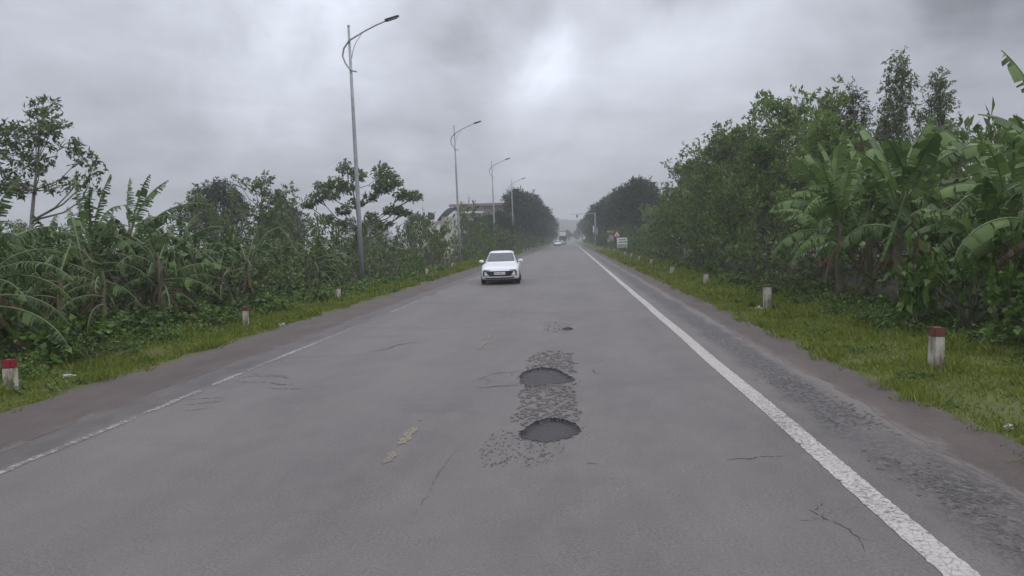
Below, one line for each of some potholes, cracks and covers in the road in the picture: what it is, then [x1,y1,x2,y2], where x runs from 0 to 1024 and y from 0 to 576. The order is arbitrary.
pothole [511,367,581,388]
pothole [512,414,587,443]
crack [809,503,875,550]
crack [479,350,599,467]
